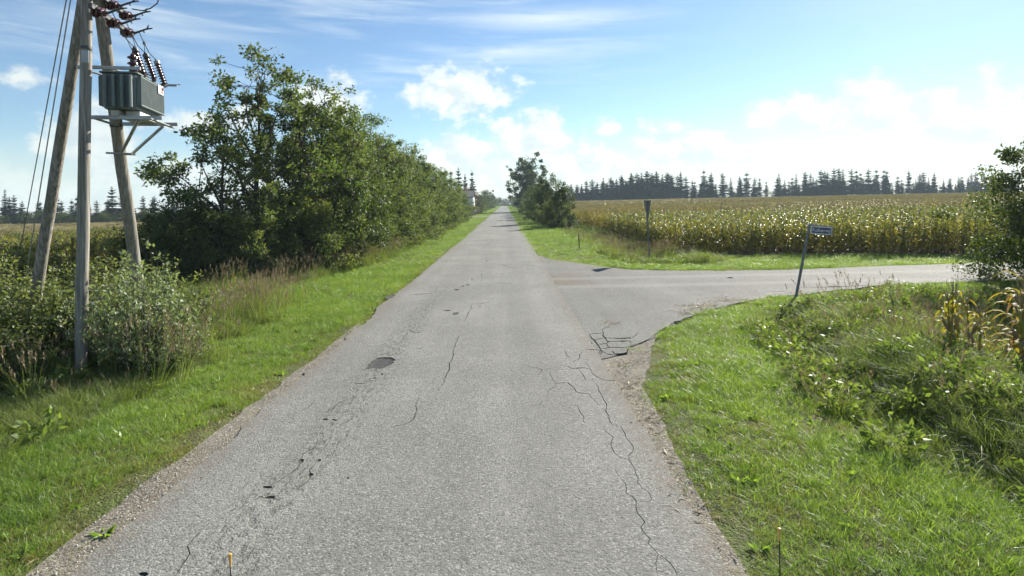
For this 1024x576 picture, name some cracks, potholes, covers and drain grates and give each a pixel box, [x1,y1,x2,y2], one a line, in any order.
crack [175,523,227,576]
pothole [366,357,395,370]
crack [537,327,677,574]
crack [438,302,490,391]
